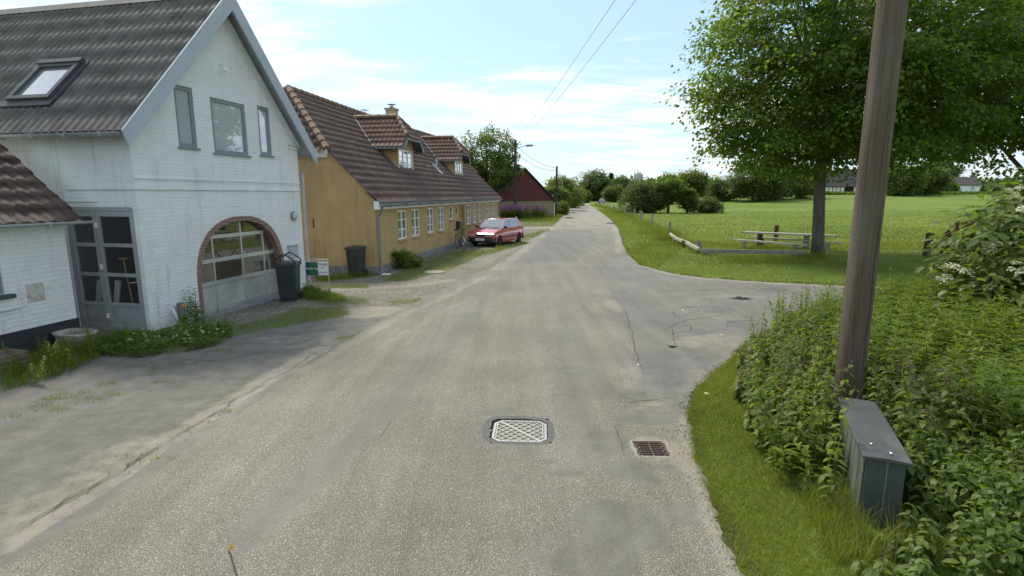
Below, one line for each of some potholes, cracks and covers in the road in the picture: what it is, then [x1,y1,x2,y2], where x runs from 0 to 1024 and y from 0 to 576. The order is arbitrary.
crack [668,293,748,346]
manhole cover [482,416,555,445]
drain grate [630,440,673,458]
